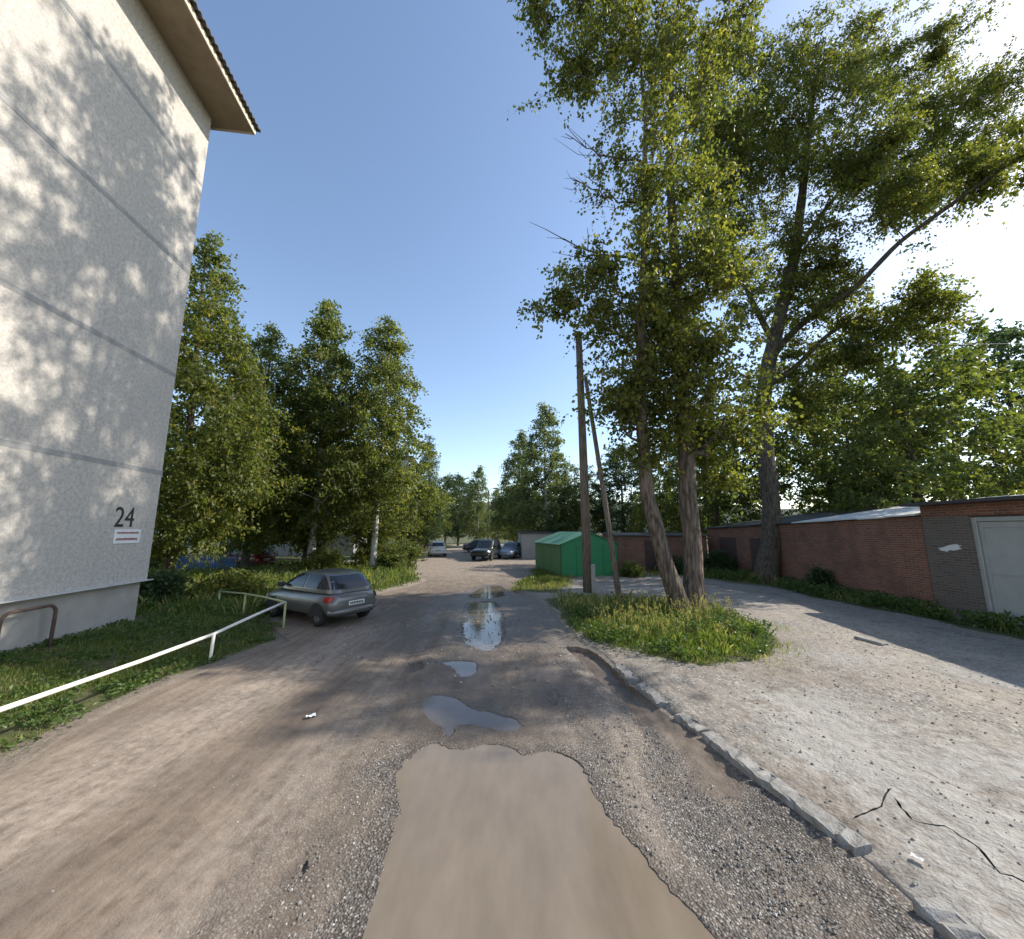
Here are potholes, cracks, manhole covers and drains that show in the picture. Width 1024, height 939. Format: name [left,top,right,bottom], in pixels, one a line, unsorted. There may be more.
pothole [468,585,507,599]
crack [853,788,1024,882]
pothole [460,601,506,651]
pothole [443,660,478,677]
pothole [417,695,522,737]
pothole [362,743,717,939]
